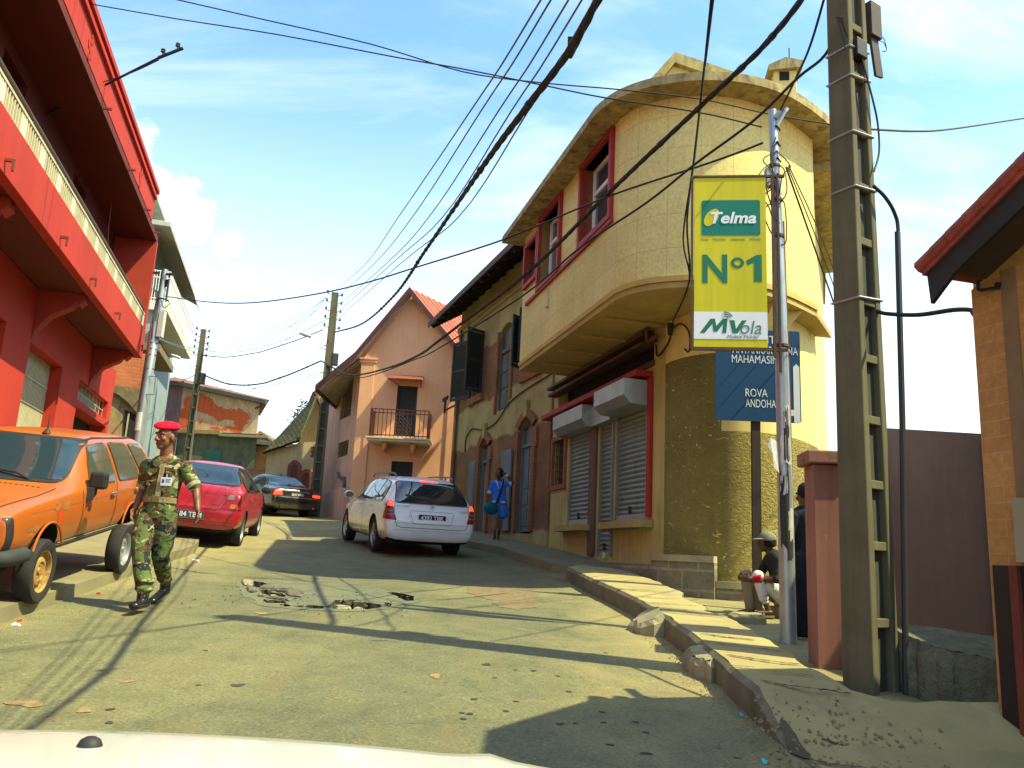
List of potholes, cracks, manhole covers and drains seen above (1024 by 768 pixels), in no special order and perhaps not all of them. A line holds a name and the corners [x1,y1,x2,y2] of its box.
pothole [327,600,382,609]
